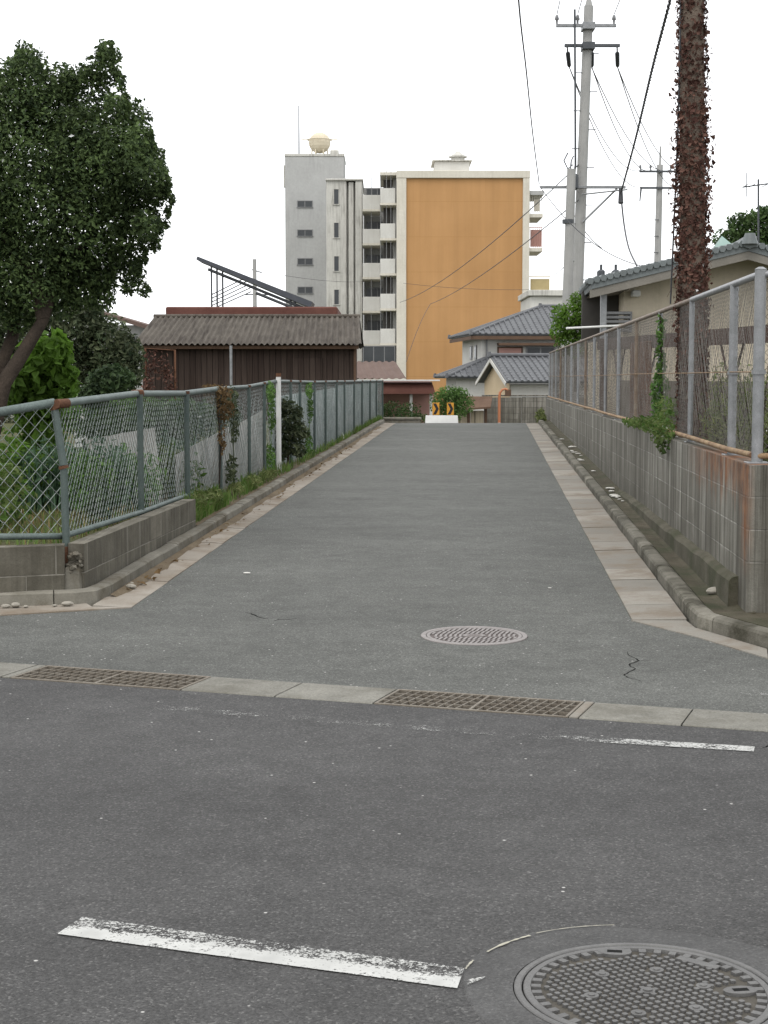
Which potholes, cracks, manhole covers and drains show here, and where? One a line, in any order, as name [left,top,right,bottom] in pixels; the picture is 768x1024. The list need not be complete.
manhole cover [421,626,528,646]
drain grate [374,689,584,718]
drain grate [10,665,211,691]
manhole cover [514,943,768,1024]
